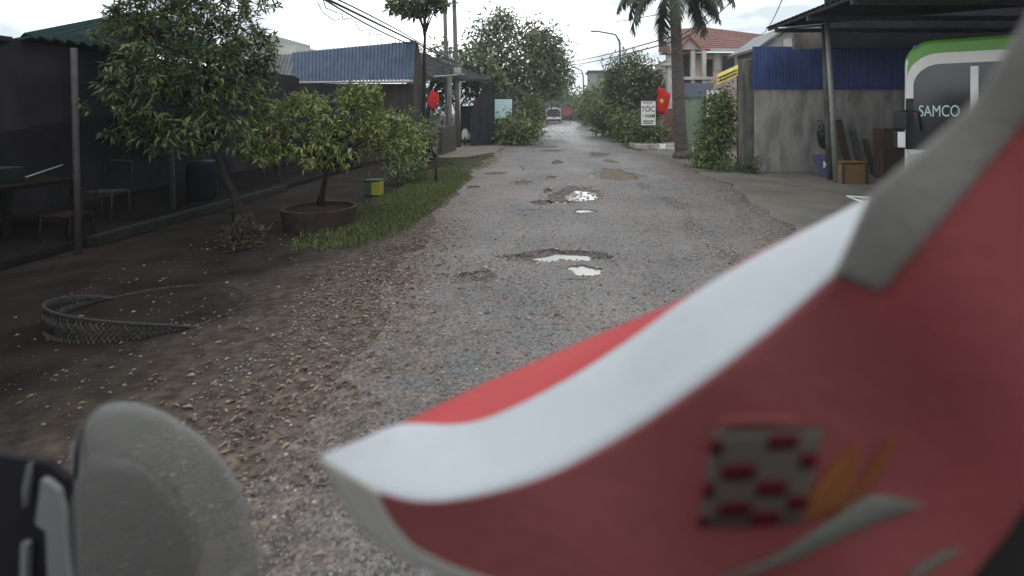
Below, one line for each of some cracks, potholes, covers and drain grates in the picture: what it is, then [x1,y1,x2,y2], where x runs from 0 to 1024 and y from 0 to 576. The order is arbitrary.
pothole [566,264,606,277]
pothole [599,167,639,181]
pothole [474,246,630,265]
pothole [445,266,504,286]
pothole [540,183,609,207]
